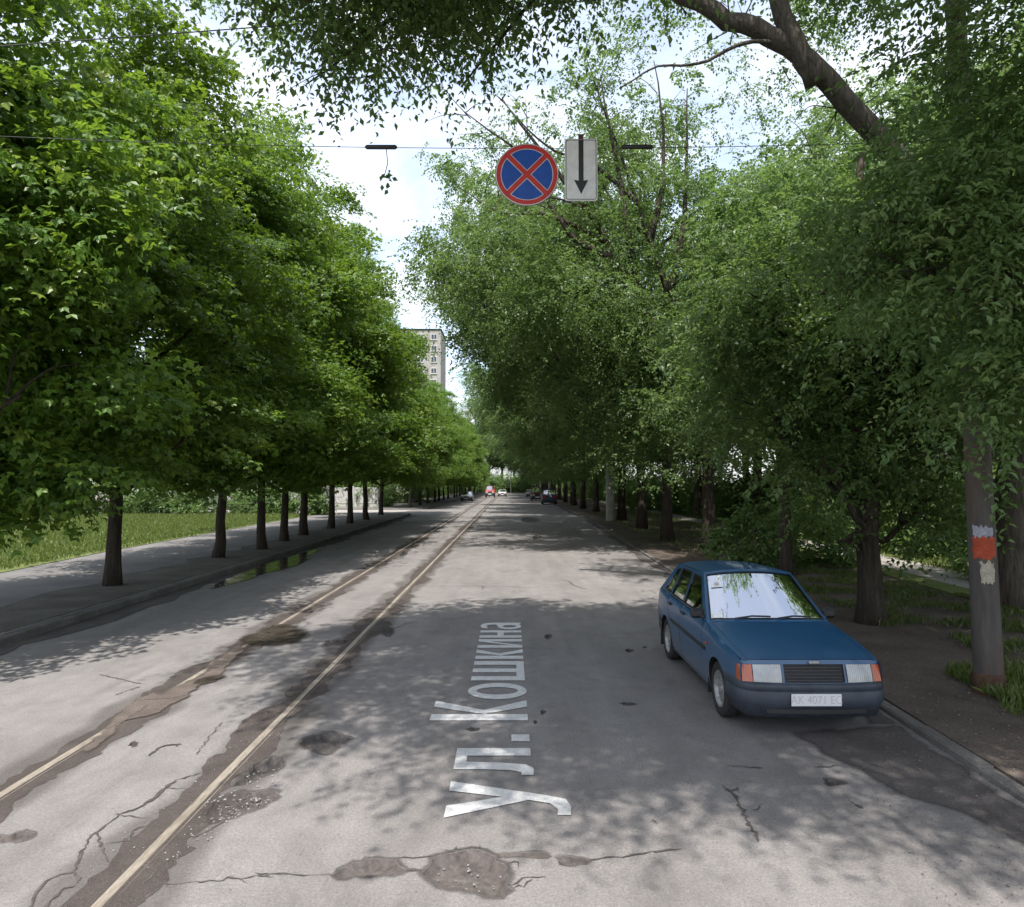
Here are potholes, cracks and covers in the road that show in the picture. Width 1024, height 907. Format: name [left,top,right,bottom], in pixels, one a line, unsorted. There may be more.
crack [29,772,200,907]
pothole [823,777,848,786]
crack [138,864,332,903]
crack [590,848,682,860]
pothole [231,756,284,787]
pothole [0,829,36,842]
crack [148,722,222,755]
pothole [296,731,352,755]
crack [725,787,761,841]
pothole [203,788,280,824]
pothole [419,846,515,898]
